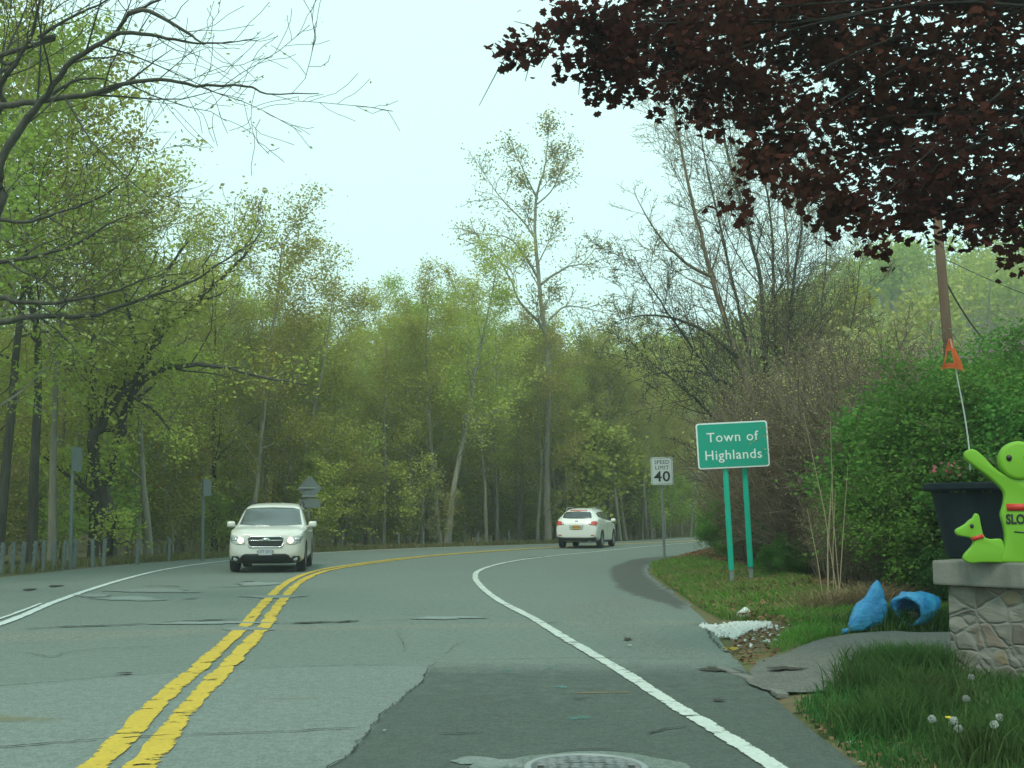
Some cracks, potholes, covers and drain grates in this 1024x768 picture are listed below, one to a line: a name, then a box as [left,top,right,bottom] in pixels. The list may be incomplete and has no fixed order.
manhole cover [524,753,649,768]
